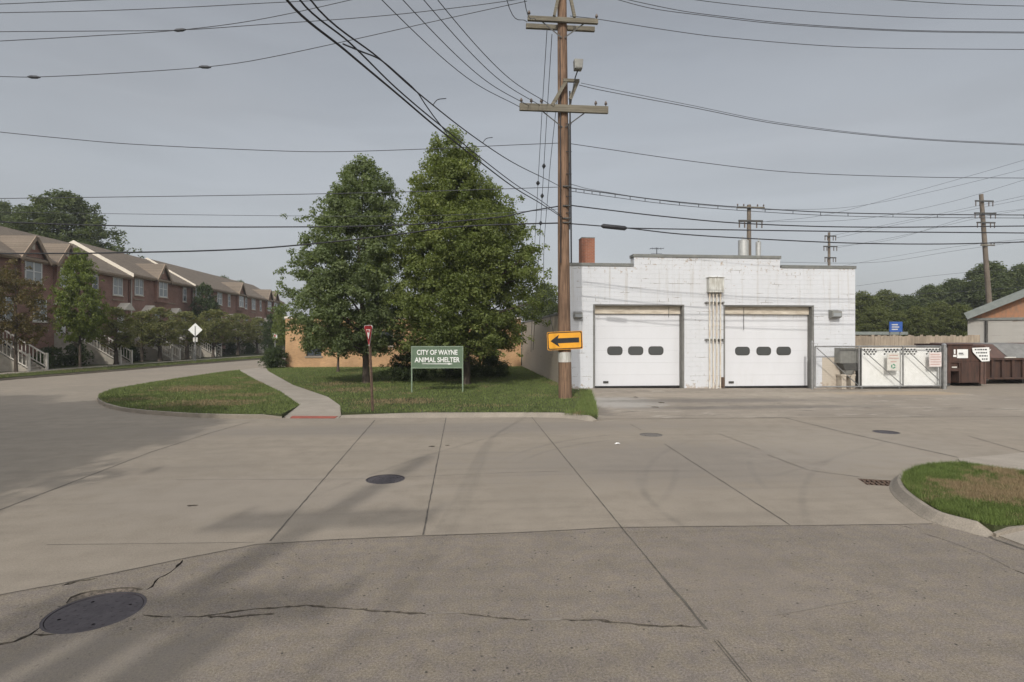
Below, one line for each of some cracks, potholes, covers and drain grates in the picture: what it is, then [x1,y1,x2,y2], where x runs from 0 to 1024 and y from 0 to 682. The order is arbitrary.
manhole cover [39,592,147,634]
crack [0,628,54,645]
crack [185,605,426,618]
crack [563,619,701,628]
crack [148,560,183,589]
manhole cover [366,474,405,484]
